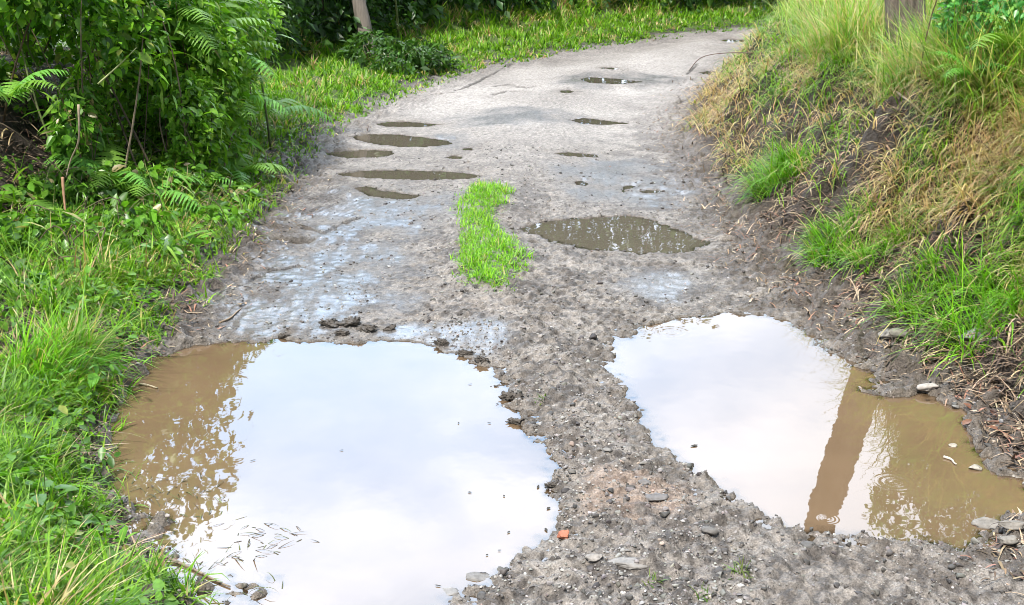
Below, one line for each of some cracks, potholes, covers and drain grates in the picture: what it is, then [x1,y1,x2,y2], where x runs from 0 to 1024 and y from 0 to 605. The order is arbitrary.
pothole [318,147,398,159]
pothole [350,184,427,199]
pothole [330,168,486,180]
pothole [373,119,445,127]
pothole [345,132,455,147]
pothole [84,333,575,605]
pothole [547,150,602,158]
pothole [566,117,636,125]
pothole [578,75,649,84]
pothole [592,307,1024,555]
pothole [514,212,720,256]
